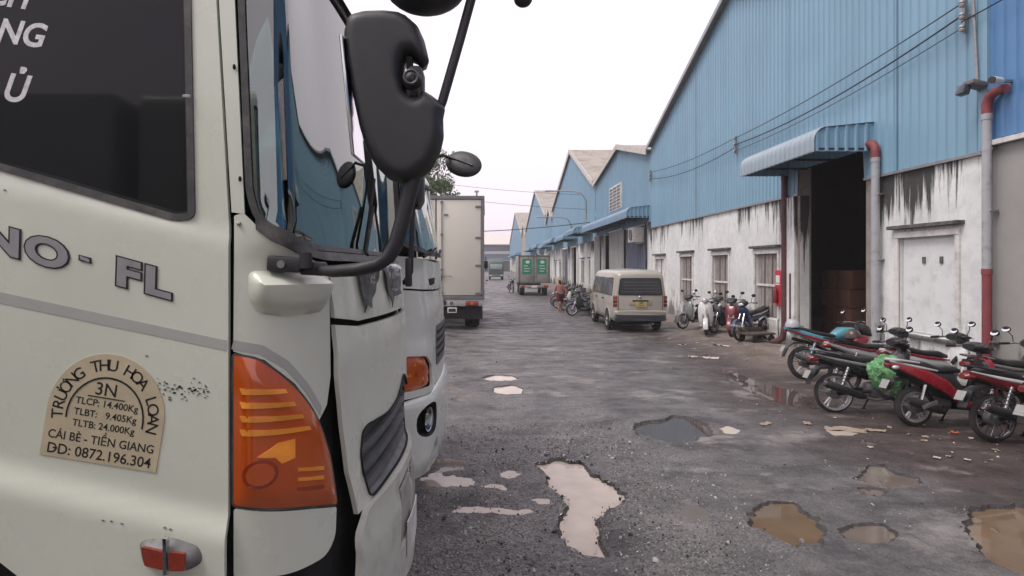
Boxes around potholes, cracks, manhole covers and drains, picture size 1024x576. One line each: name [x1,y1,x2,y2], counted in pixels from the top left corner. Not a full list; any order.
pothole [836,522,899,544]
pothole [534,457,629,558]
pothole [746,501,828,546]
pothole [857,486,888,496]
pothole [632,415,714,441]
pothole [852,464,923,484]
pothole [961,502,1024,566]
